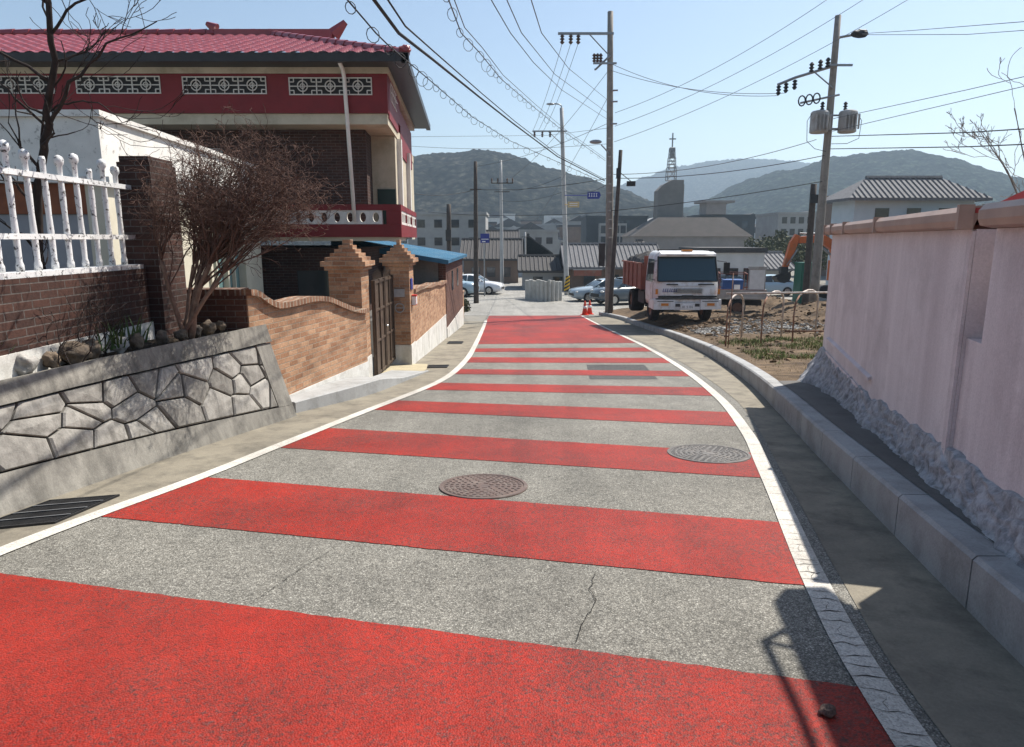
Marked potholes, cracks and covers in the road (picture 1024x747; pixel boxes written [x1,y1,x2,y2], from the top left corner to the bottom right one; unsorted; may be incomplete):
manhole cover [667,444,751,464]
drain grate [0,494,120,529]
crack [576,578,619,641]
manhole cover [439,474,528,499]
